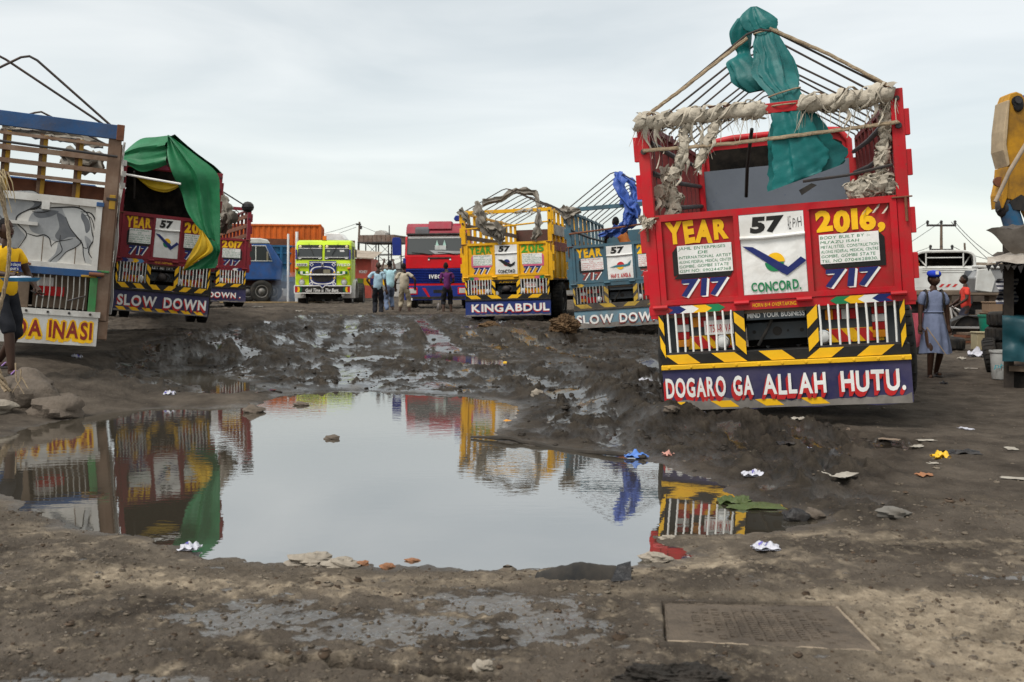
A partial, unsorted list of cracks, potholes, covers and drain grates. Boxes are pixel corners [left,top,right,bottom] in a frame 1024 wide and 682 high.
manhole cover [664,603,883,652]
pothole [0,388,821,572]
